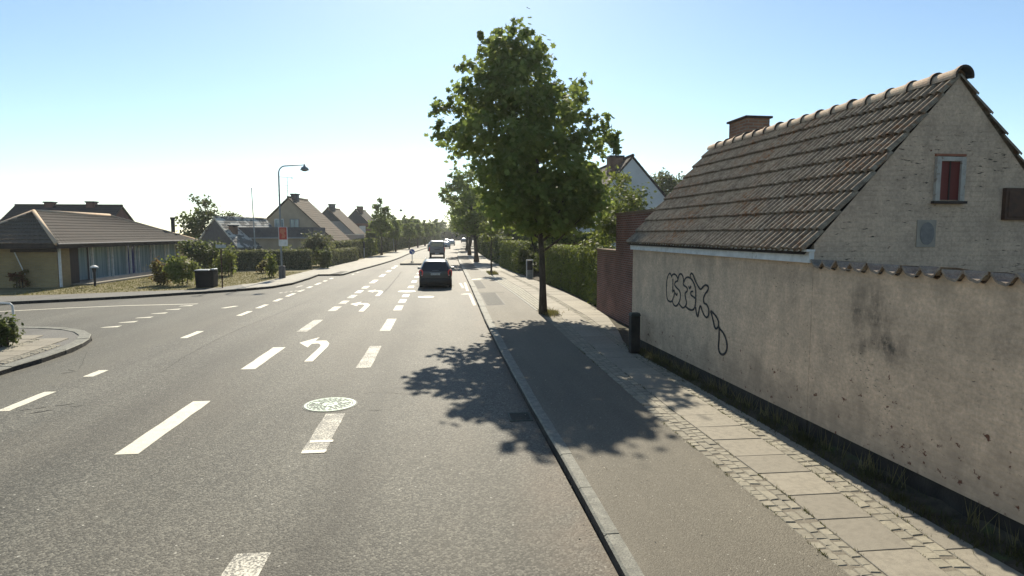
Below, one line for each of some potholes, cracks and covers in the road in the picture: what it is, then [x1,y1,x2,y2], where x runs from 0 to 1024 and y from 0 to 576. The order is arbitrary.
manhole cover [302,397,358,412]
drain grate [507,412,533,422]
